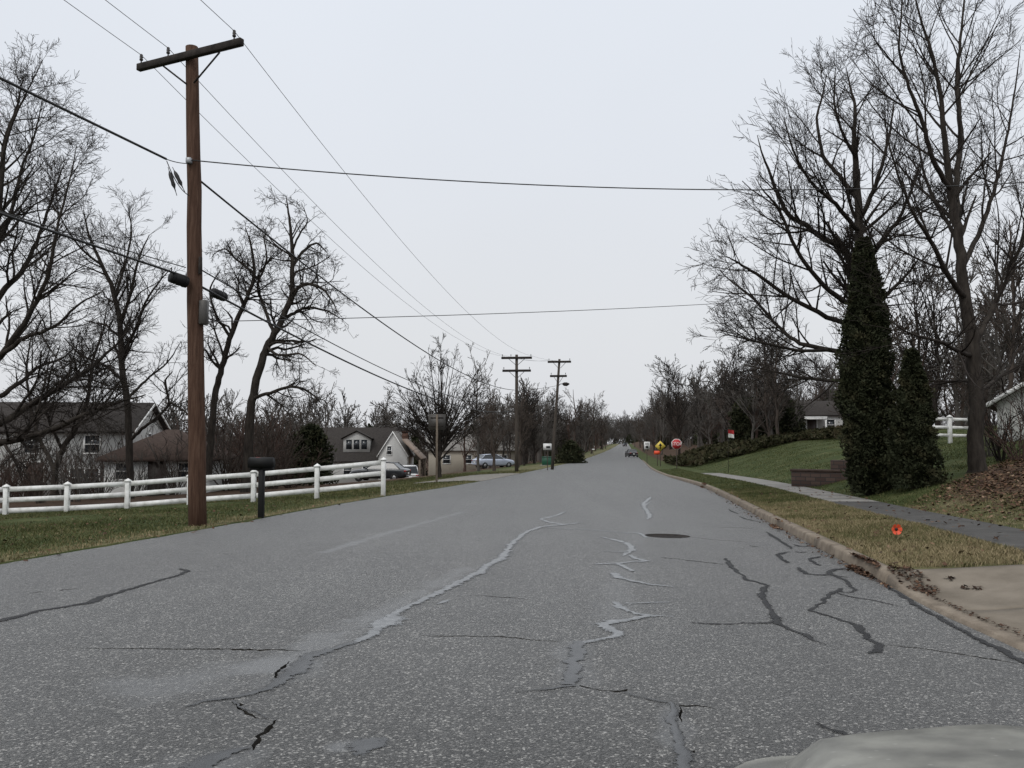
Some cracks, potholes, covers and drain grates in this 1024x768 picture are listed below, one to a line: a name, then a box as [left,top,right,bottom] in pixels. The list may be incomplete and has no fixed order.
crack [548,497,653,538]
